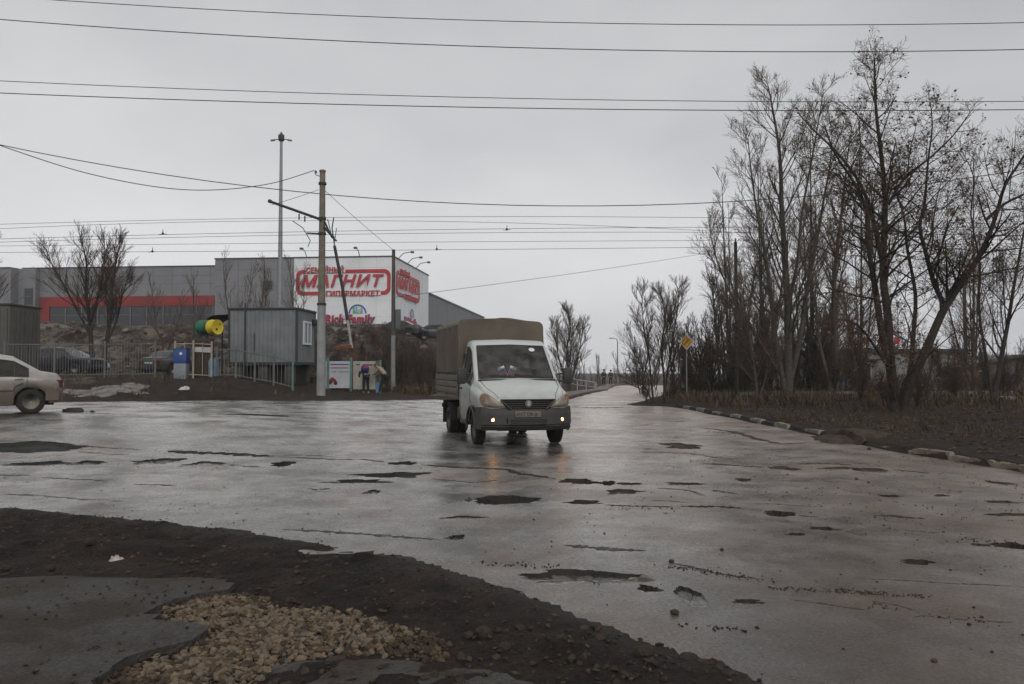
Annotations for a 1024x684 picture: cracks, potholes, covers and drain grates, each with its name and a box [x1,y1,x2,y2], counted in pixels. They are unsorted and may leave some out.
pothole [520,569,655,585]
pothole [673,586,709,608]
pothole [130,458,188,466]
pothole [0,440,94,453]
pothole [637,584,664,592]
crack [670,563,756,579]
pothole [473,495,542,505]
